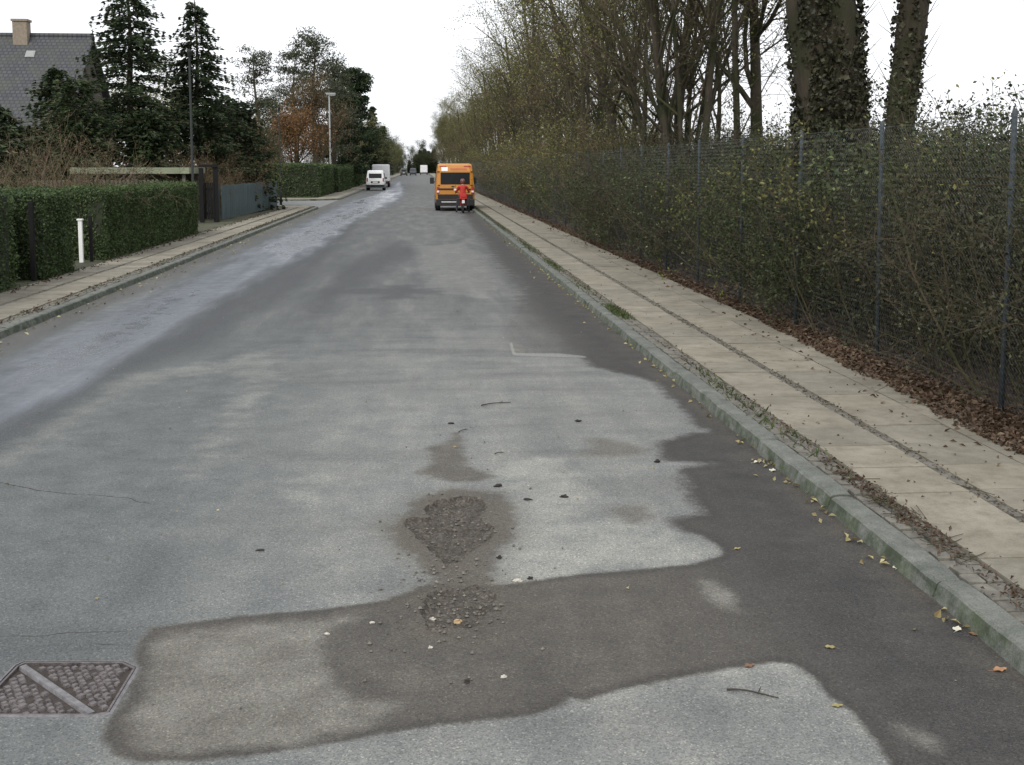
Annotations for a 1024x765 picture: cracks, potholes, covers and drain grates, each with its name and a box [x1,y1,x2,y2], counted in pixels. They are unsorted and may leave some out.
crack [4,631,138,645]
crack [0,482,157,505]
manhole cover [0,661,140,717]
pothole [404,496,494,566]
pothole [419,584,497,631]
